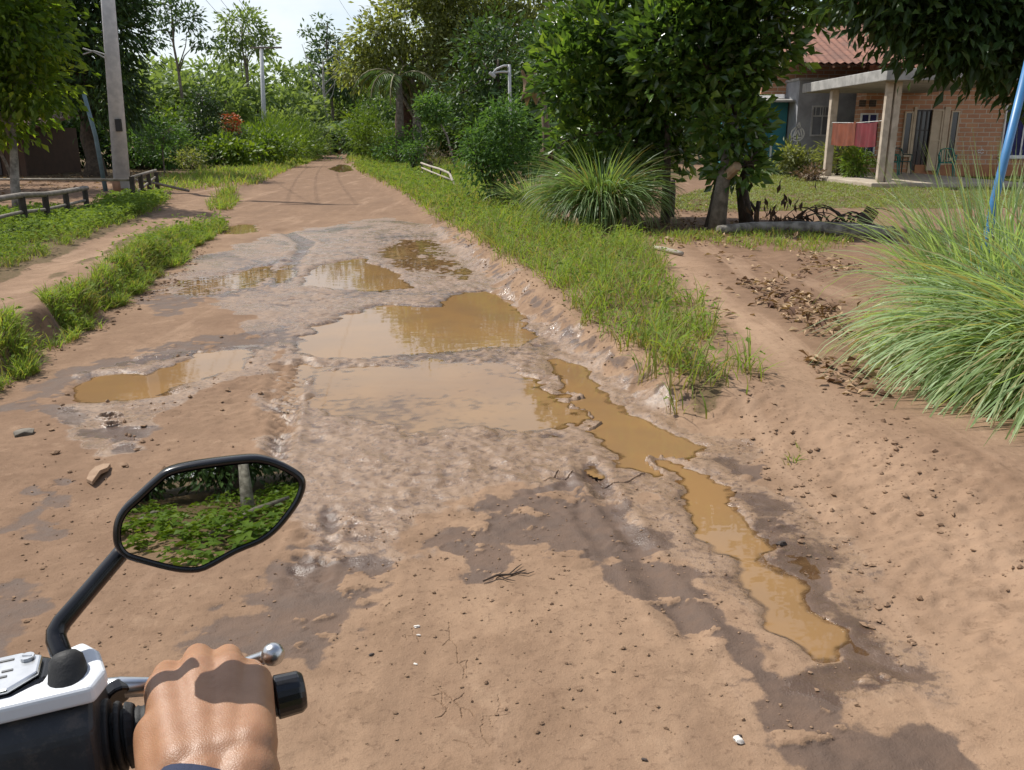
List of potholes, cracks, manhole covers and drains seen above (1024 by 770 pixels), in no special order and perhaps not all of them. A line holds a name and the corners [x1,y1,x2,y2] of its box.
pothole [276,358,613,442]
pothole [367,232,490,284]
pothole [328,163,357,173]
pothole [289,285,553,361]
crack [404,621,510,750]
pothole [630,452,858,669]
pothole [292,255,419,292]
pothole [536,351,715,480]
pothole [150,259,308,297]
pothole [59,348,266,405]
